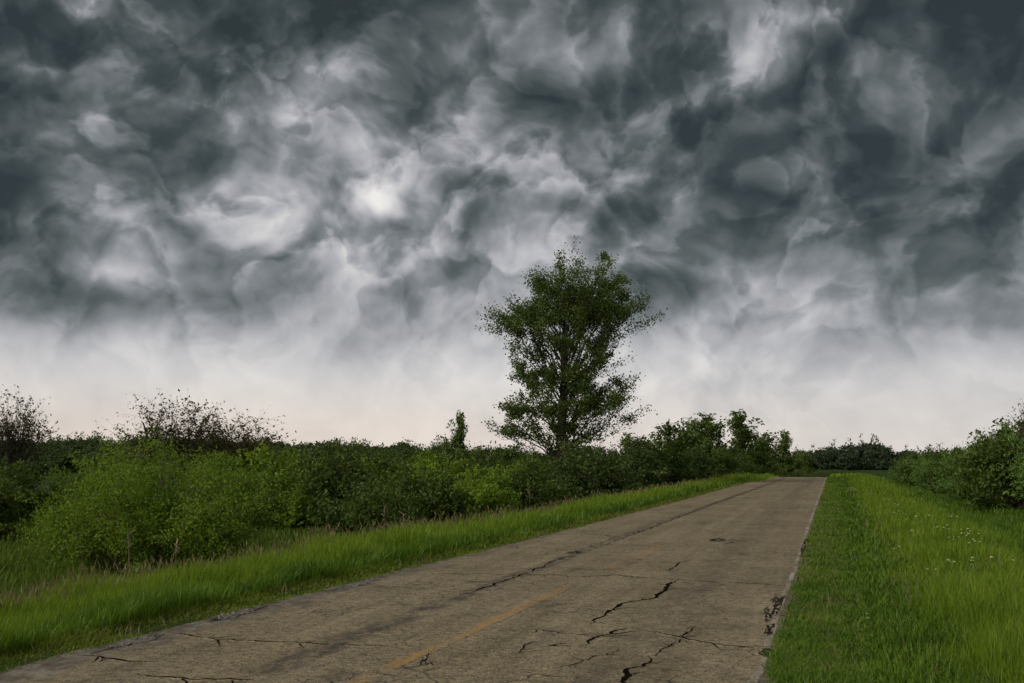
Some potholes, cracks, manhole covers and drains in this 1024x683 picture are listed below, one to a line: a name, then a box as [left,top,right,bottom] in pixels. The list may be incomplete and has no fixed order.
crack [427,526,813,683]
crack [76,633,392,683]
